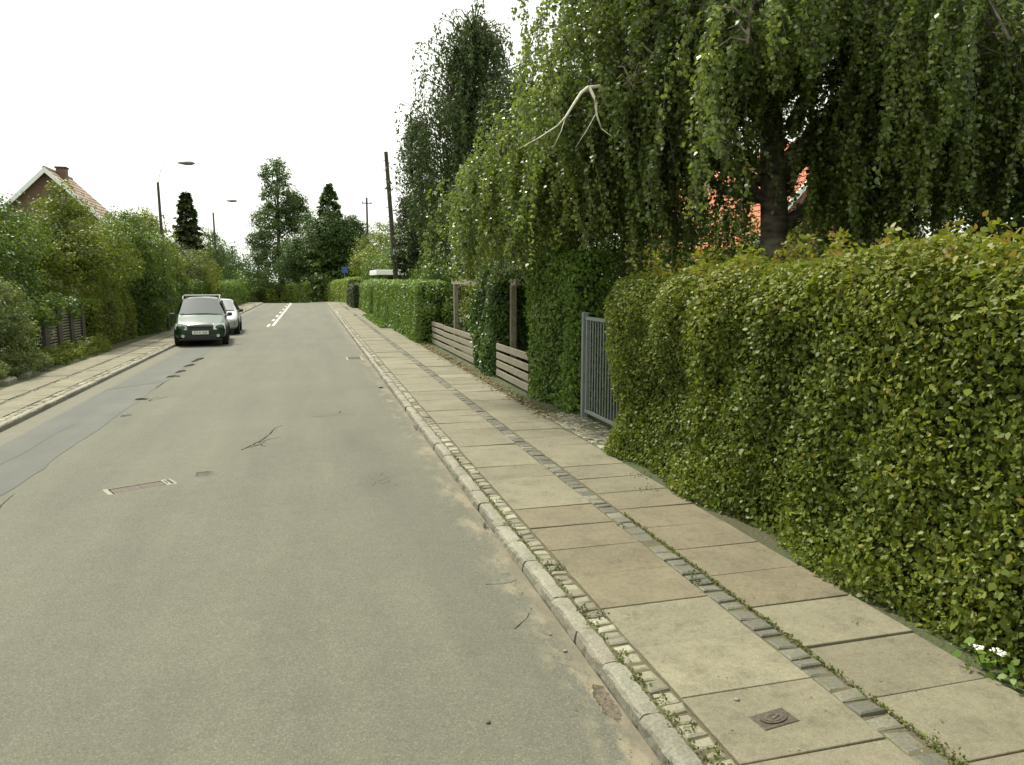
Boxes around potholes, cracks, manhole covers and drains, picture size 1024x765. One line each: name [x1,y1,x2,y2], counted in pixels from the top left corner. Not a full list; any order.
manhole cover [748,707,800,731]
crack [241,426,280,450]
